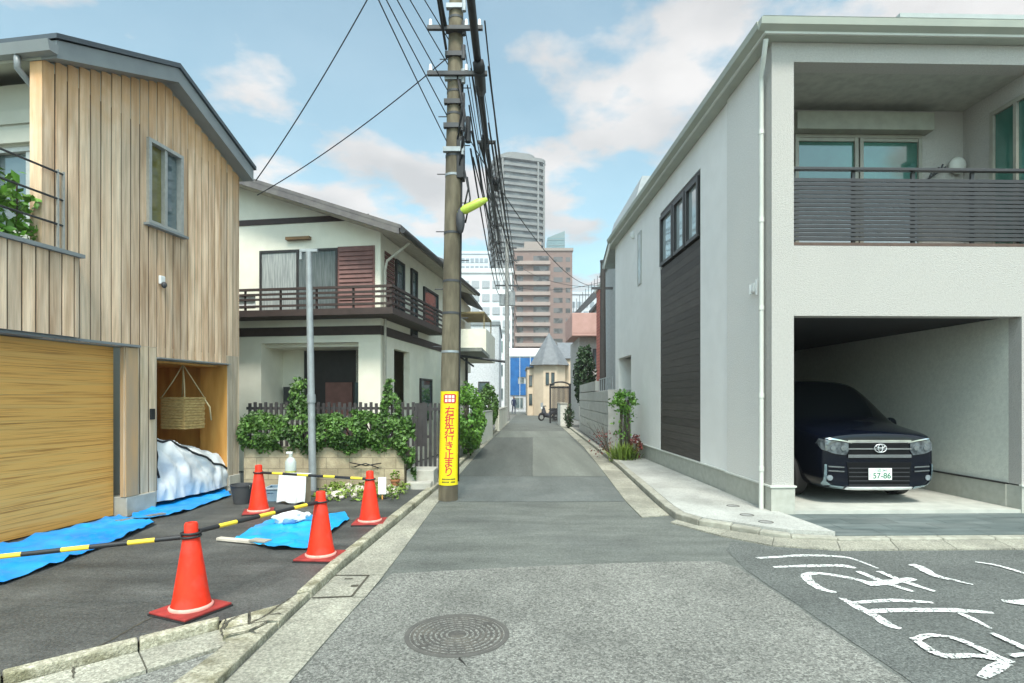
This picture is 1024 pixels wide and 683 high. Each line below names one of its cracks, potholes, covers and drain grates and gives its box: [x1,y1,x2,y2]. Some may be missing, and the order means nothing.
manhole cover [404,614,509,658]
crack [220,598,290,637]
